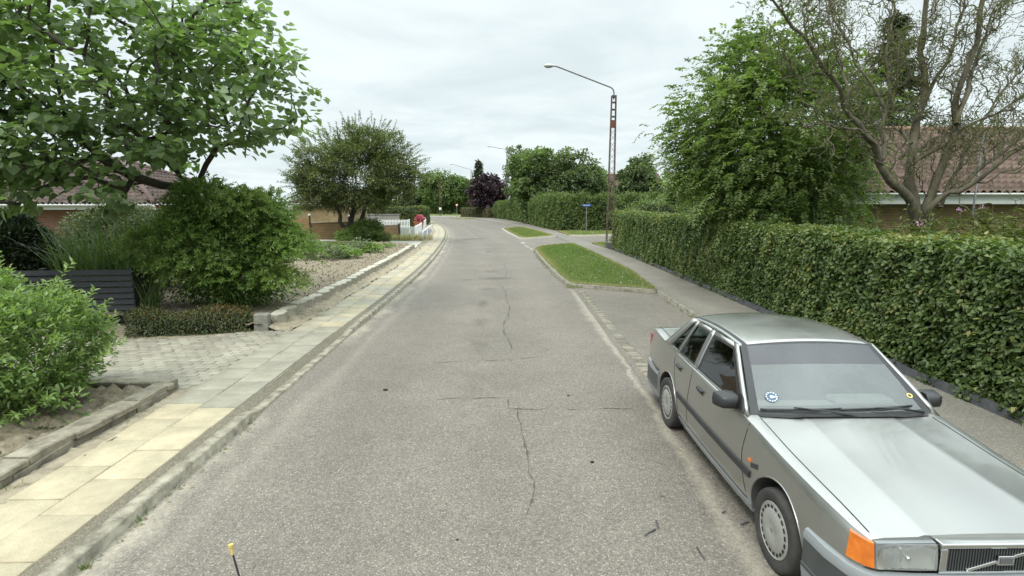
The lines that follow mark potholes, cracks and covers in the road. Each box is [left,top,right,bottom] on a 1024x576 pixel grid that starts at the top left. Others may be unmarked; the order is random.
crack [436,228,547,363]
crack [437,397,629,515]
